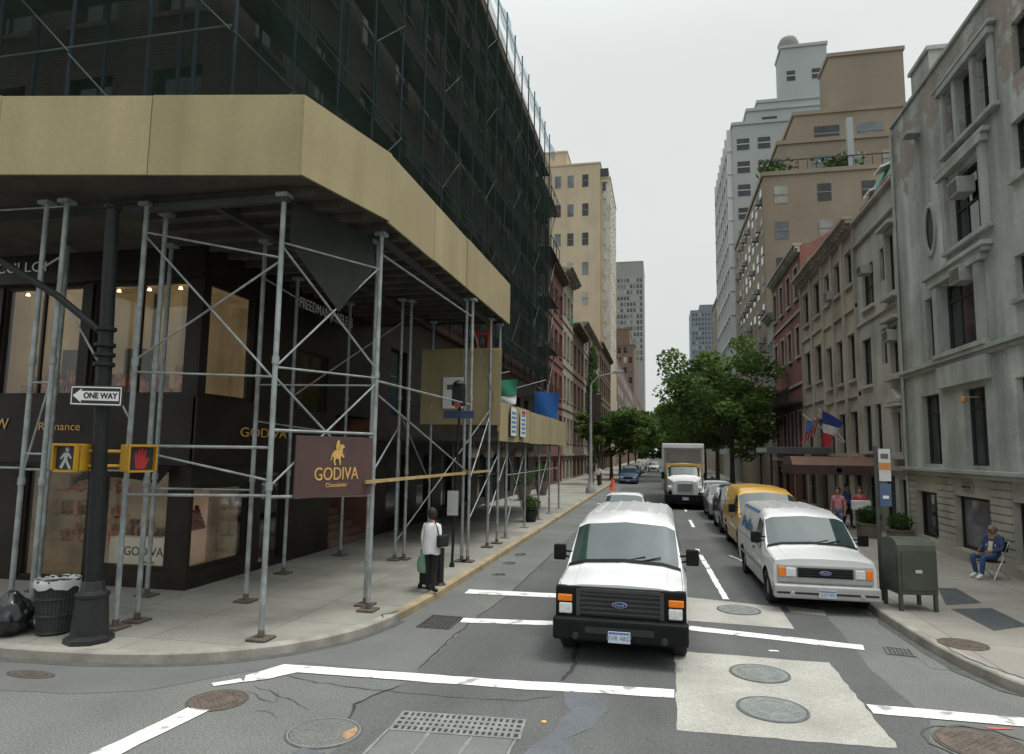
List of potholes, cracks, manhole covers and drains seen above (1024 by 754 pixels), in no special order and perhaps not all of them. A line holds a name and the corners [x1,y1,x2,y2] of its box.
crack [249,642,581,717]
manhole cover [284,717,363,749]
manhole cover [937,638,990,651]
manhole cover [736,696,810,723]
manhole cover [932,727,1024,754]
drain grate [883,646,917,657]
manhole cover [185,689,249,712]
manhole cover [6,670,55,679]
manhole cover [717,605,761,615]
drain grate [388,711,527,740]
manhole cover [729,664,791,684]
drain grate [416,615,464,630]
